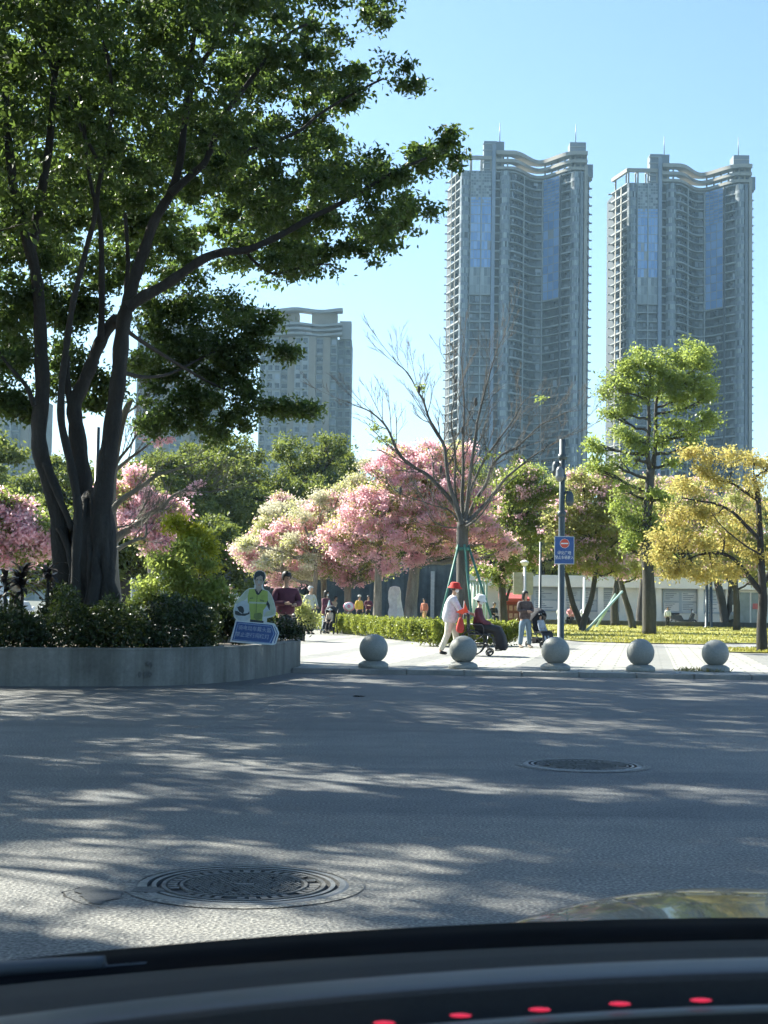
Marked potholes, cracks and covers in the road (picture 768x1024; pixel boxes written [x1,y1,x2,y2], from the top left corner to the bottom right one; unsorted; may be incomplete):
manhole cover [122,862,365,908]
manhole cover [514,757,651,772]
